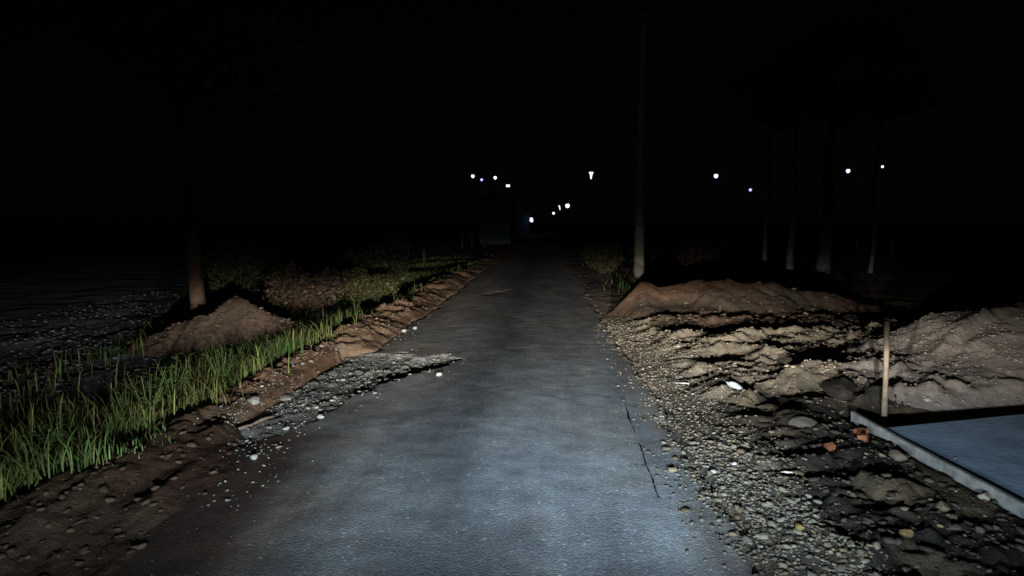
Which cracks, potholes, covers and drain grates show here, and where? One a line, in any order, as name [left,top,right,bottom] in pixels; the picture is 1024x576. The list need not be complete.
crack [618,388,660,498]
pothole [233,352,467,448]
